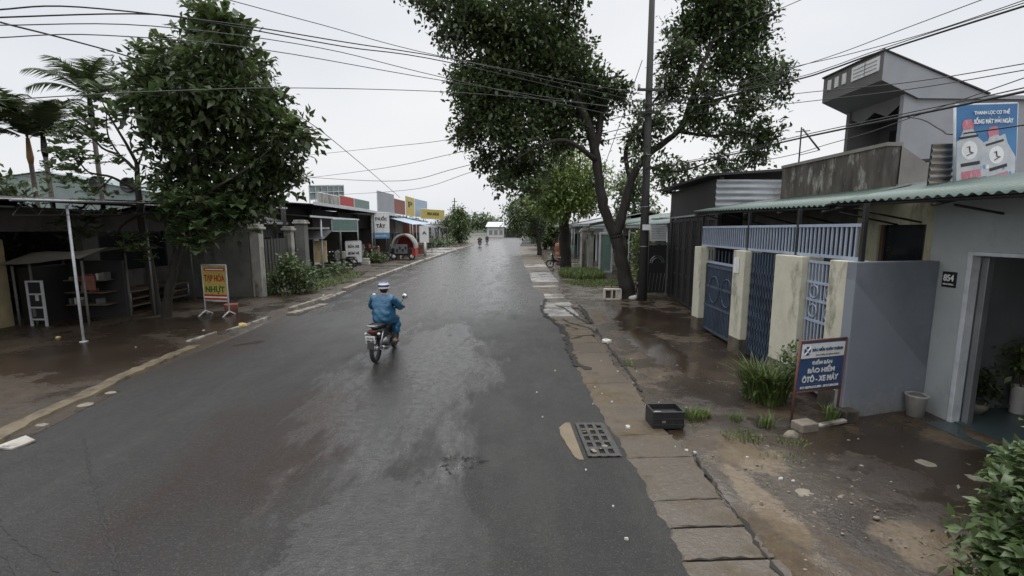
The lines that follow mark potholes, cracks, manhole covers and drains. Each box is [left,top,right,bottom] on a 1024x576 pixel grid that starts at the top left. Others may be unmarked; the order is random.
crack [82,438,120,576]
crack [0,518,70,576]
pothole [422,448,494,481]
